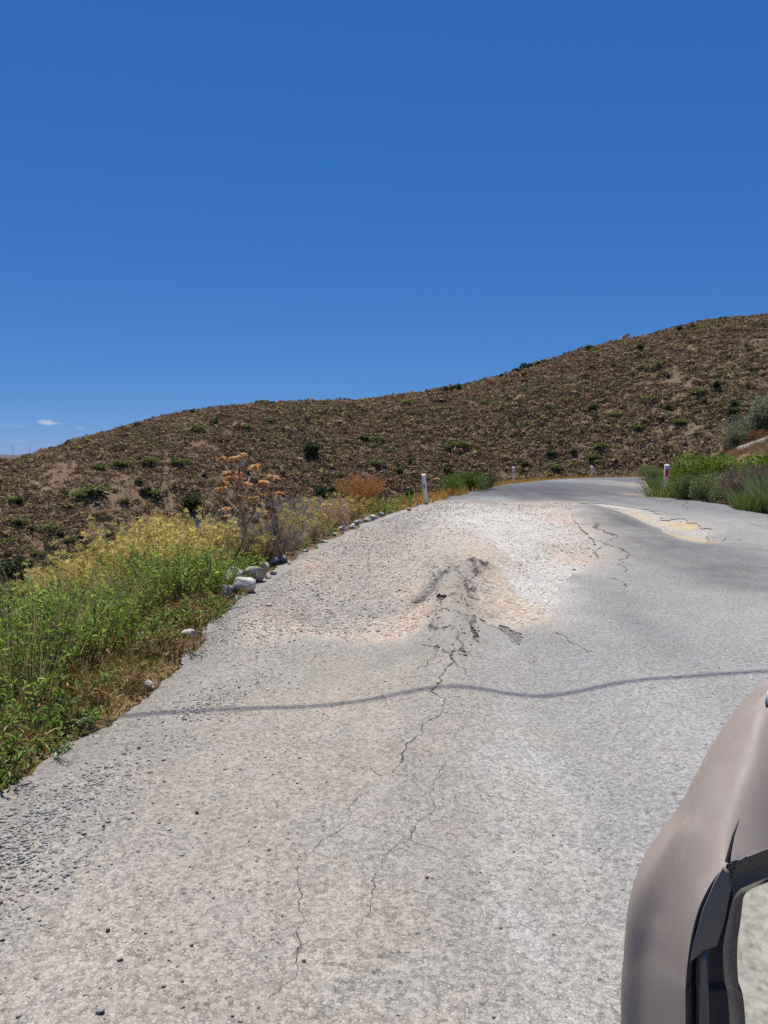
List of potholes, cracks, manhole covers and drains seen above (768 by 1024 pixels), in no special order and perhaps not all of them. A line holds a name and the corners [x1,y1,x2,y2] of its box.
crack [592,524,632,607]
pothole [238,501,596,642]
crack [268,594,499,999]
